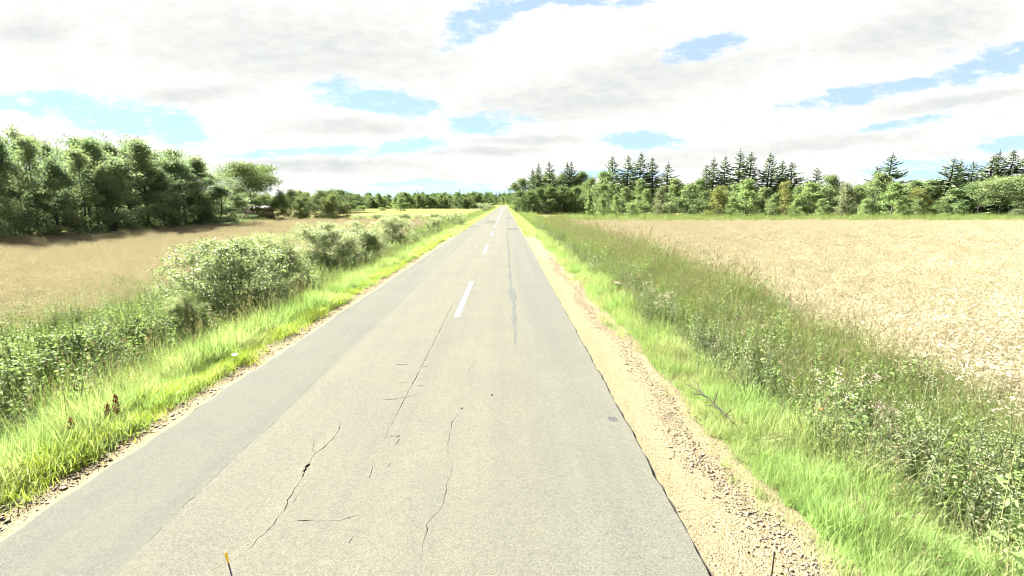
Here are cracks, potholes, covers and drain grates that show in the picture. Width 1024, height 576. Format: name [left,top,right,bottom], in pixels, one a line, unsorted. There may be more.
crack [386,301,456,436]
crack [421,419,455,554]
crack [245,423,360,552]
